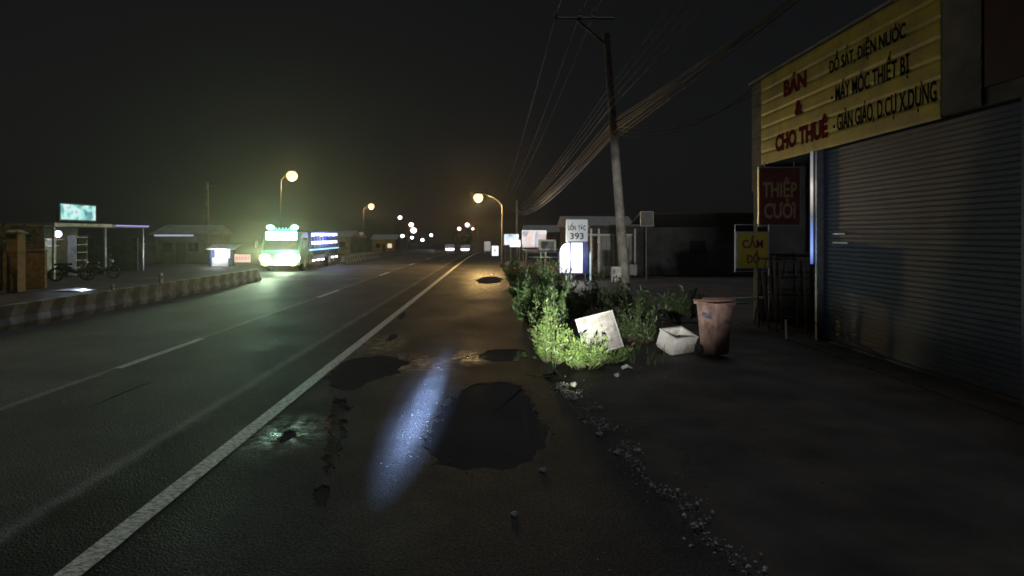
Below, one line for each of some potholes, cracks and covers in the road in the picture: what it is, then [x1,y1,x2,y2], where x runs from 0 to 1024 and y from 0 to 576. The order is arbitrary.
pothole [420,382,556,478]
pothole [476,349,532,362]
pothole [277,430,297,444]
pothole [323,354,413,393]
pothole [474,276,504,284]
